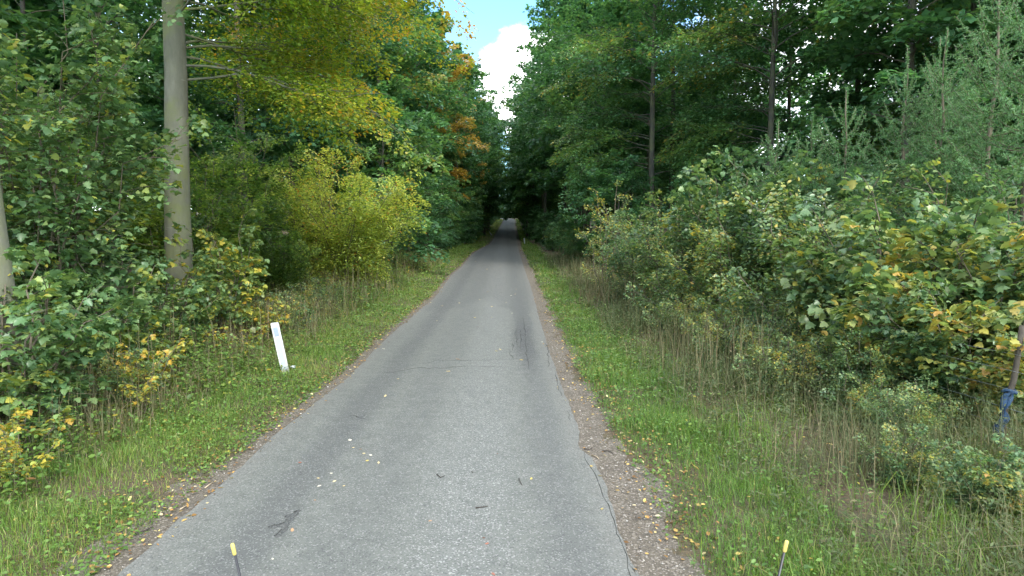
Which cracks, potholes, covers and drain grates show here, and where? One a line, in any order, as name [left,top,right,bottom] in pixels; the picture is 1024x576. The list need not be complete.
crack [585,459,636,576]
crack [412,318,529,369]
